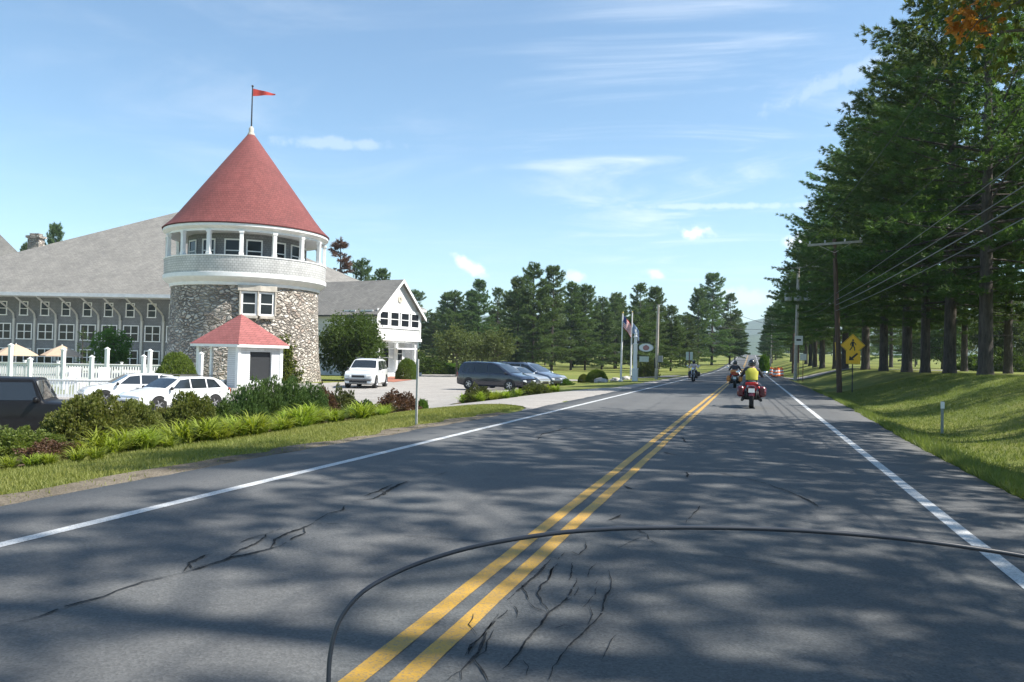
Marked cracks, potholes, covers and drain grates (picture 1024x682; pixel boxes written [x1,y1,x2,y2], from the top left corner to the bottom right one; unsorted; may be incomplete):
crack [448,544,617,680]
crack [9,480,409,624]
